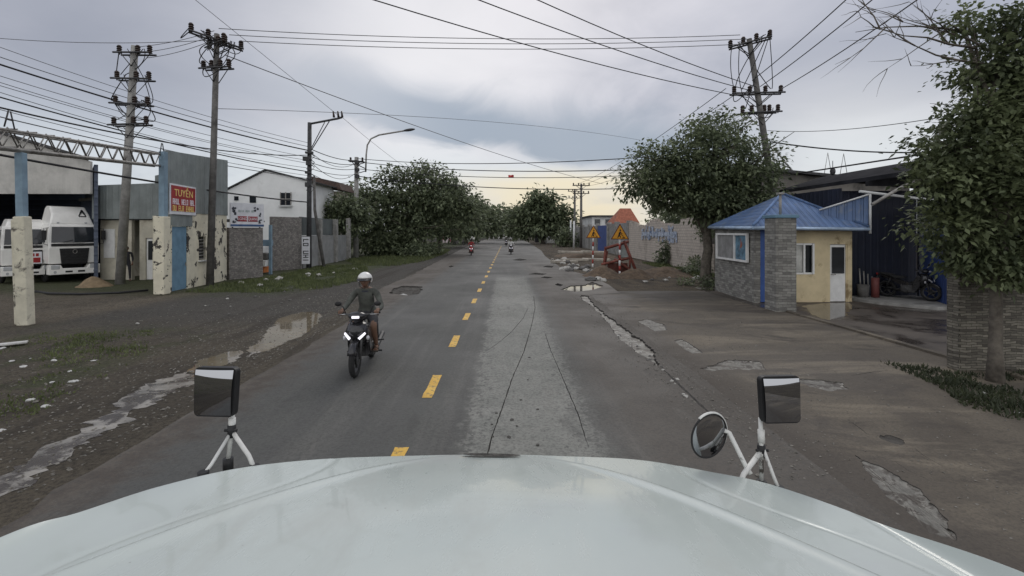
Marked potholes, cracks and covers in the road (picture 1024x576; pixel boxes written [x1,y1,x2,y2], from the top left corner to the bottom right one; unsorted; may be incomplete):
pothole [700,360,766,371]
pothole [879,435,905,445]
pothole [800,379,849,391]
pothole [855,455,957,541]
pothole [561,282,603,292]
pothole [389,286,423,295]
crack [487,297,589,453]
pothole [674,339,702,353]
pothole [638,319,667,332]
